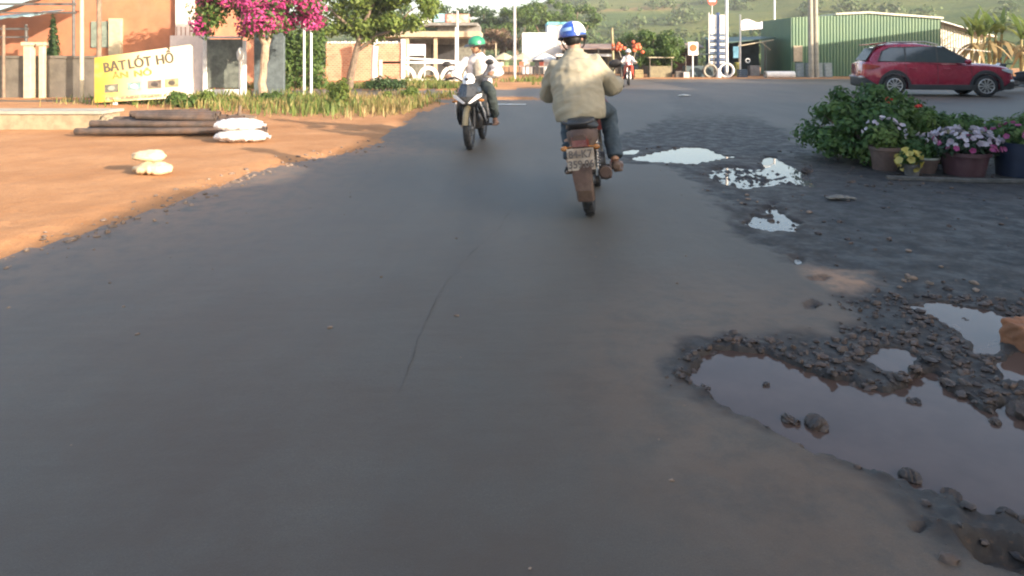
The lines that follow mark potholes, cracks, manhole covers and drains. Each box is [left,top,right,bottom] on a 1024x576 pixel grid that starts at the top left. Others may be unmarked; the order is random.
crack [399,213,509,391]
pothole [738,200,805,232]
pothole [905,299,1008,355]
pothole [632,147,734,164]
pothole [671,343,1024,516]
pothole [702,155,823,190]
